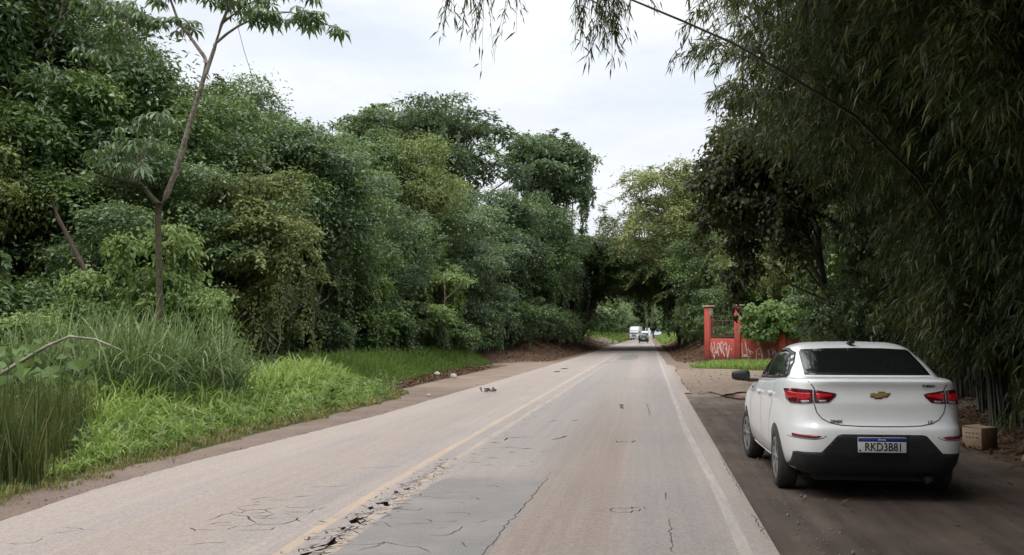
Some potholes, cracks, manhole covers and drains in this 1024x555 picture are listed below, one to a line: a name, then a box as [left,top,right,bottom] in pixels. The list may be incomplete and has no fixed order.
crack [184,404,548,555]
